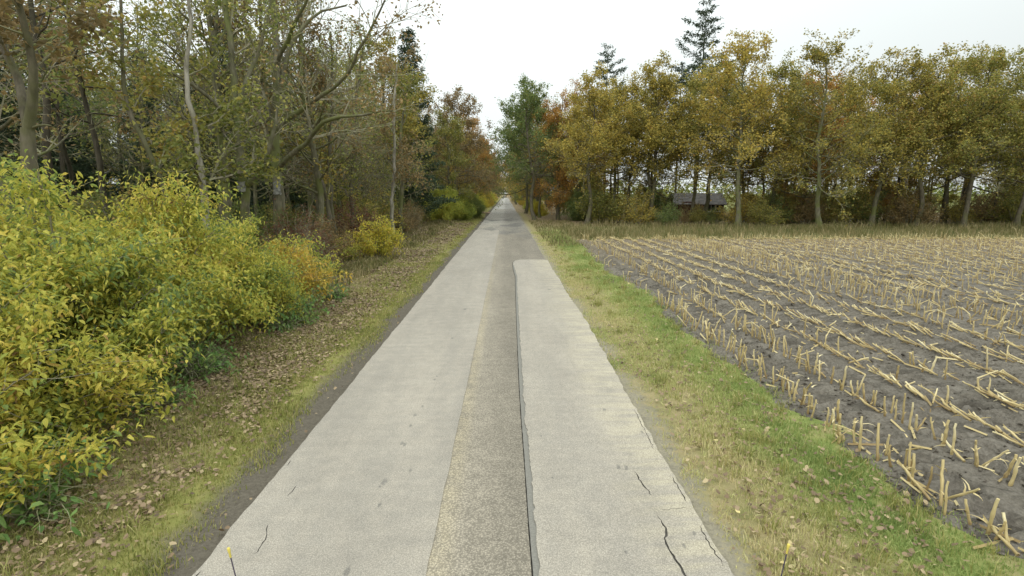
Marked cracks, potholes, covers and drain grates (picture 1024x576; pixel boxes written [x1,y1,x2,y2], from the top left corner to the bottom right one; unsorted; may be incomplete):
crack [634,413,723,576]
